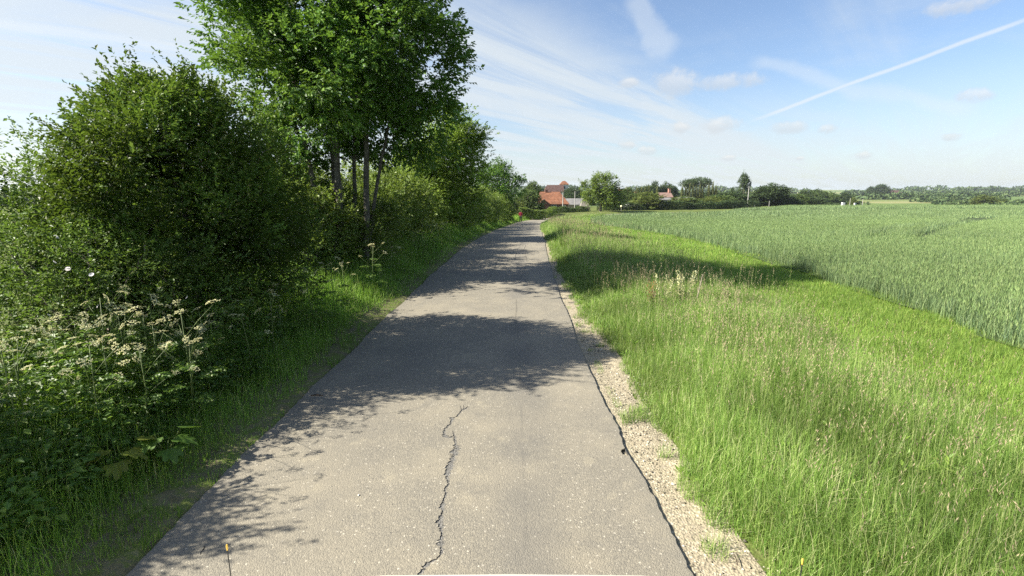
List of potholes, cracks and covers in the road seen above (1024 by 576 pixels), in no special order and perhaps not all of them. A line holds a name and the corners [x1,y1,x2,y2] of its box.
crack [417,405,468,575]
